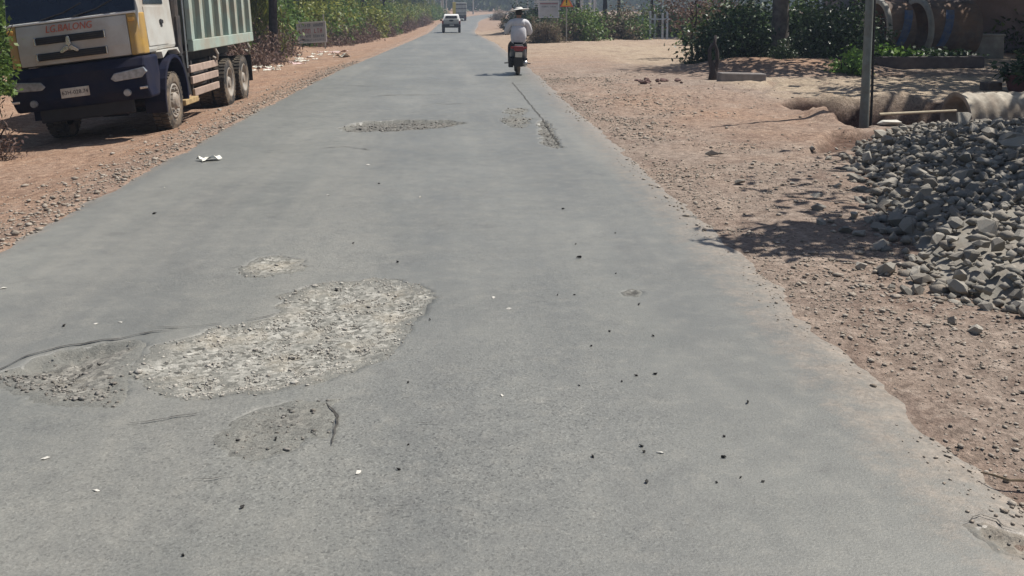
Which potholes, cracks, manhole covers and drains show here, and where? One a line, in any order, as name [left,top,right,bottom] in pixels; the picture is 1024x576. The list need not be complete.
crack [326,402,339,444]
pothole [621,289,642,297]
pothole [0,339,146,408]
pothole [238,255,306,278]
pothole [338,120,467,133]
pothole [125,277,436,400]
pothole [538,121,564,148]
pothole [500,108,534,128]
